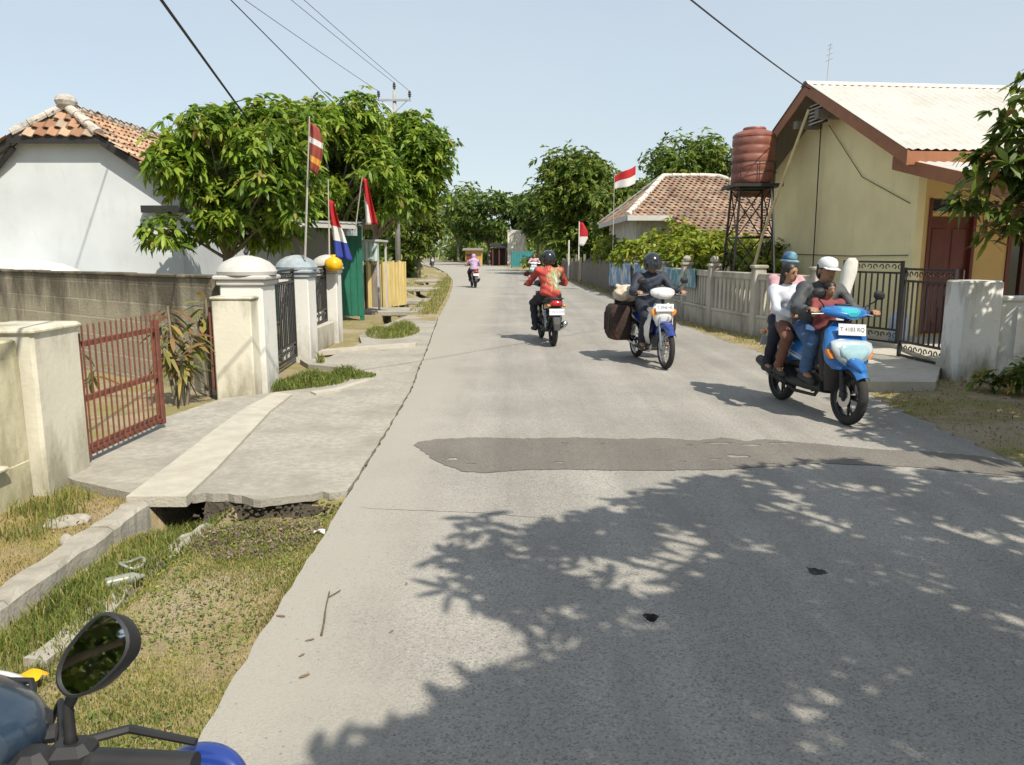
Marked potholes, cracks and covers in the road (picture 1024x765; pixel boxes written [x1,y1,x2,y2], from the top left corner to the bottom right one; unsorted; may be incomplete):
pothole [642,611,661,625]
pothole [805,566,828,576]
